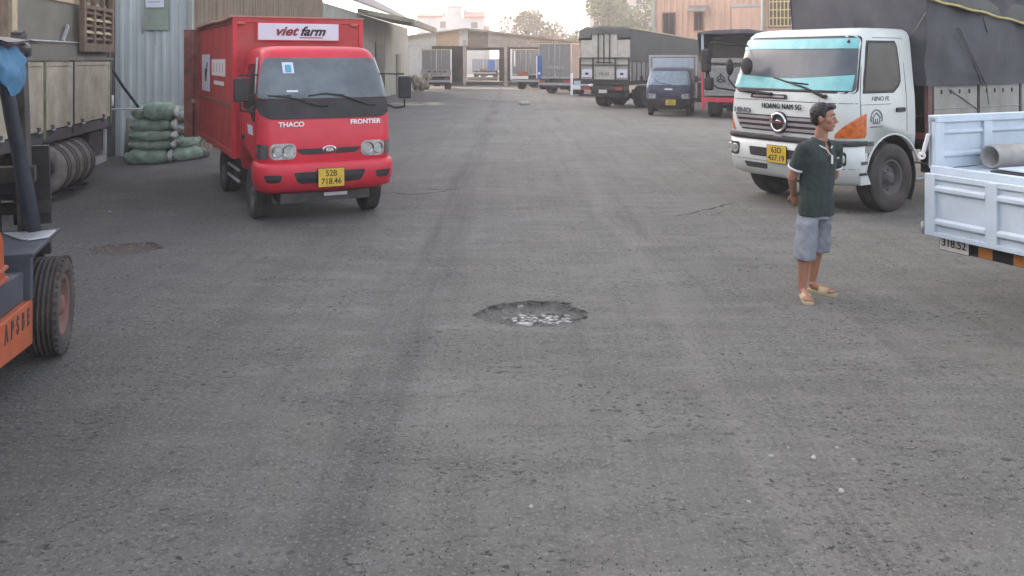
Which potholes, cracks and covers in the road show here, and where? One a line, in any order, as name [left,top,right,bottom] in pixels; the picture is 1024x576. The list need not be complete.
pothole [89,241,164,256]
pothole [472,300,589,328]
